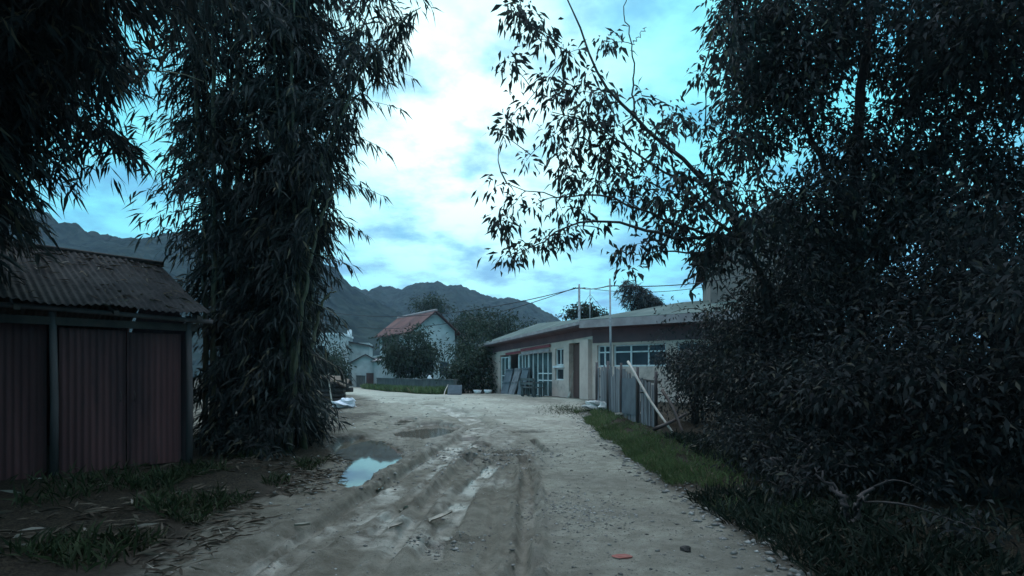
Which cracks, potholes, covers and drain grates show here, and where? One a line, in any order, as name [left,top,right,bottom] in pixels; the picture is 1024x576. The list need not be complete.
pothole [324,433,411,487]
pothole [389,420,465,439]
